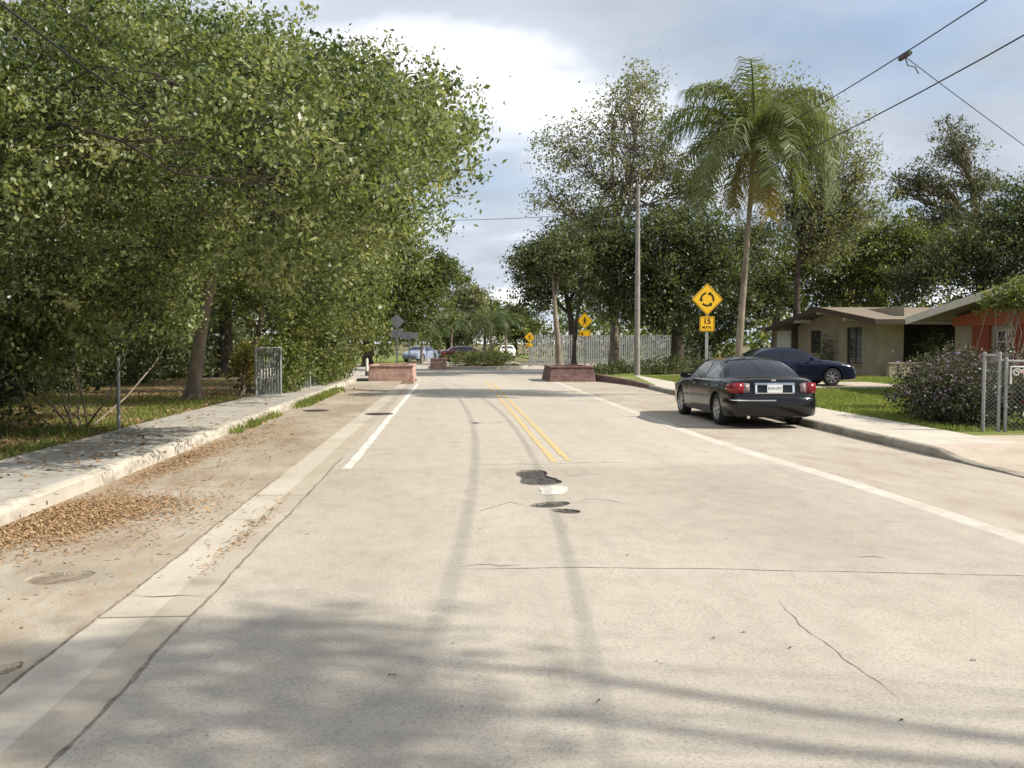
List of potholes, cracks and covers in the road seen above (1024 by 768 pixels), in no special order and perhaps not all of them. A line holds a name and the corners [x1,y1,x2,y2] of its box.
pothole [515,470,562,485]
crack [778,599,900,699]
